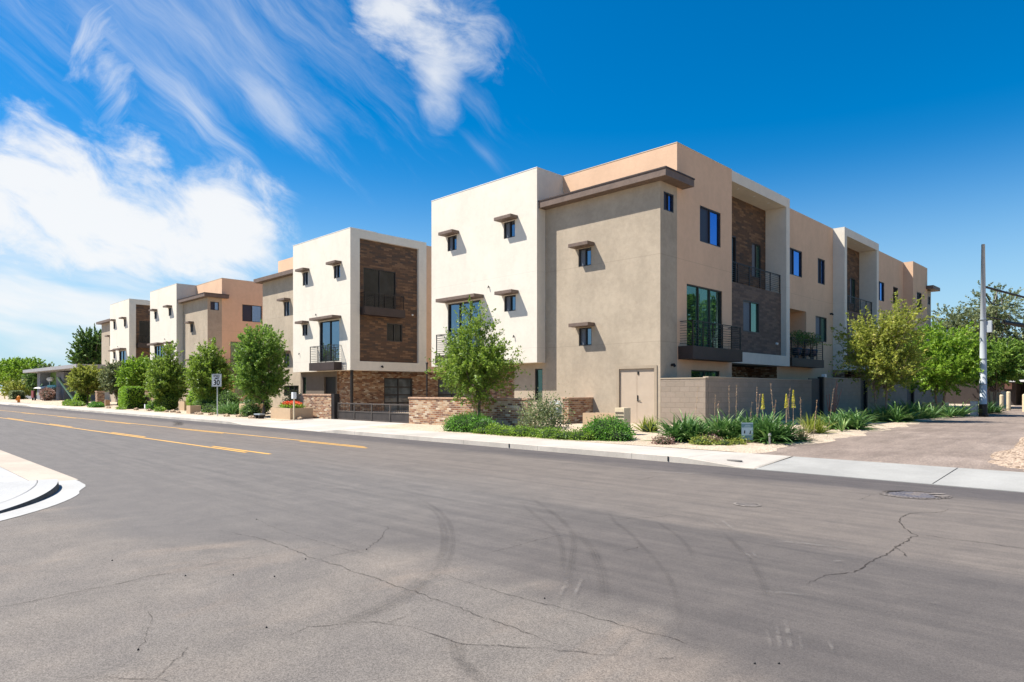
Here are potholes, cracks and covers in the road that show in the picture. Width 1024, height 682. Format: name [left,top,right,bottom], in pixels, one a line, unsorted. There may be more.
crack [240,519,614,655]
manhole cover [879,490,952,499]
crack [814,511,1009,581]
